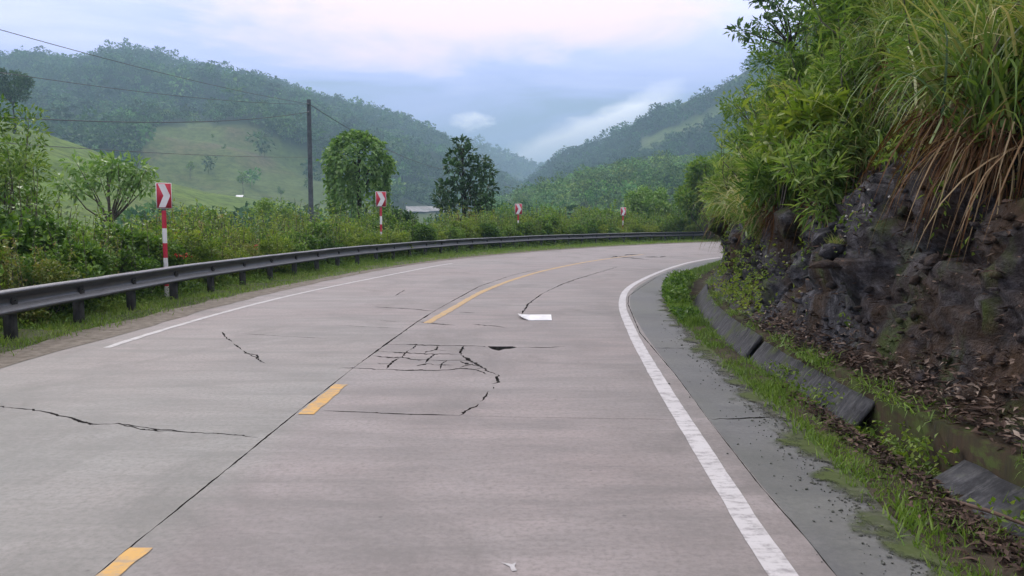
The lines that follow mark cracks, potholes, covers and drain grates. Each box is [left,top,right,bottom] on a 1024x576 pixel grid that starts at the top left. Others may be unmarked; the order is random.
crack [337,291,626,419]
crack [522,254,666,313]
crack [222,332,311,363]
crack [0,406,257,438]
